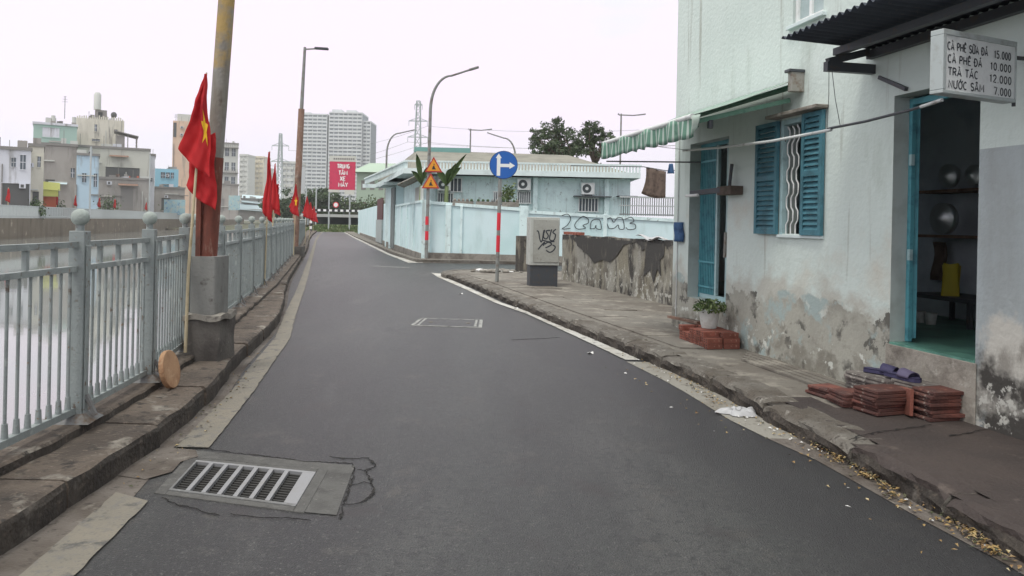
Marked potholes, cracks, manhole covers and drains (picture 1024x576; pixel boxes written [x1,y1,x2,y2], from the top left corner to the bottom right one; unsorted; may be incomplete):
drain grate [154,457,328,513]
crack [161,497,308,520]
crack [186,448,376,519]
crack [849,424,931,440]
